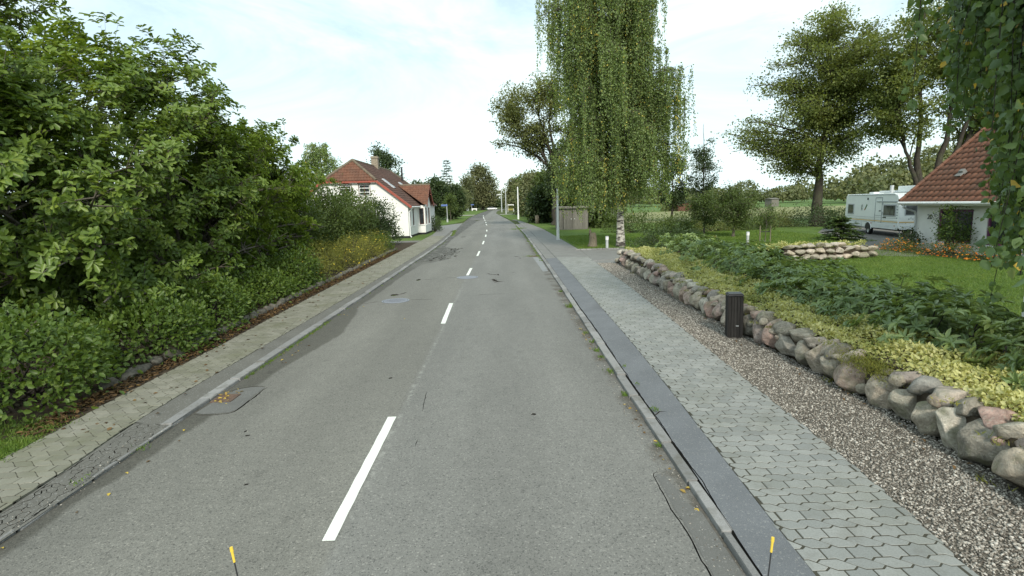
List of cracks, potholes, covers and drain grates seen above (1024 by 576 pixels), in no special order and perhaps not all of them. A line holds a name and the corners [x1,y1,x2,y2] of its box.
crack [0,424,160,536]
